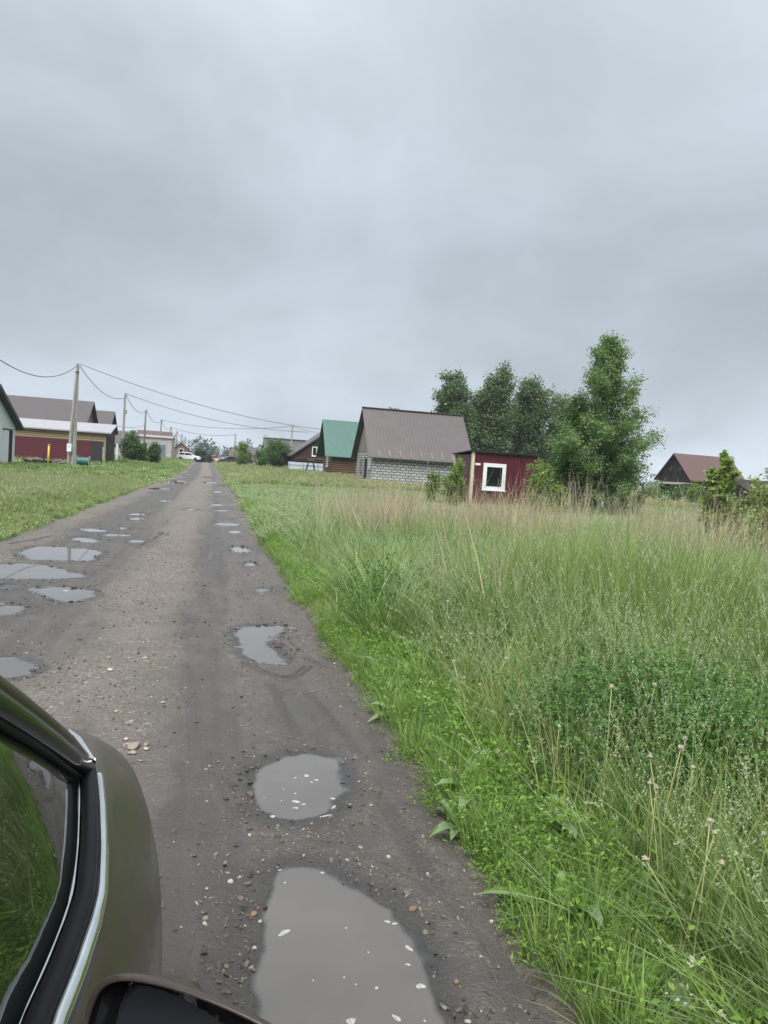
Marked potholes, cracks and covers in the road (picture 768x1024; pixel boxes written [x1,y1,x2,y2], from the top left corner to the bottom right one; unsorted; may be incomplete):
pothole [0,543,125,563]
pothole [224,545,258,554]
pothole [211,620,311,668]
pothole [17,583,119,605]
pothole [0,601,48,619]
pothole [181,836,515,1024]
pothole [0,560,115,582]
pothole [210,740,383,841]
pothole [0,651,63,684]
